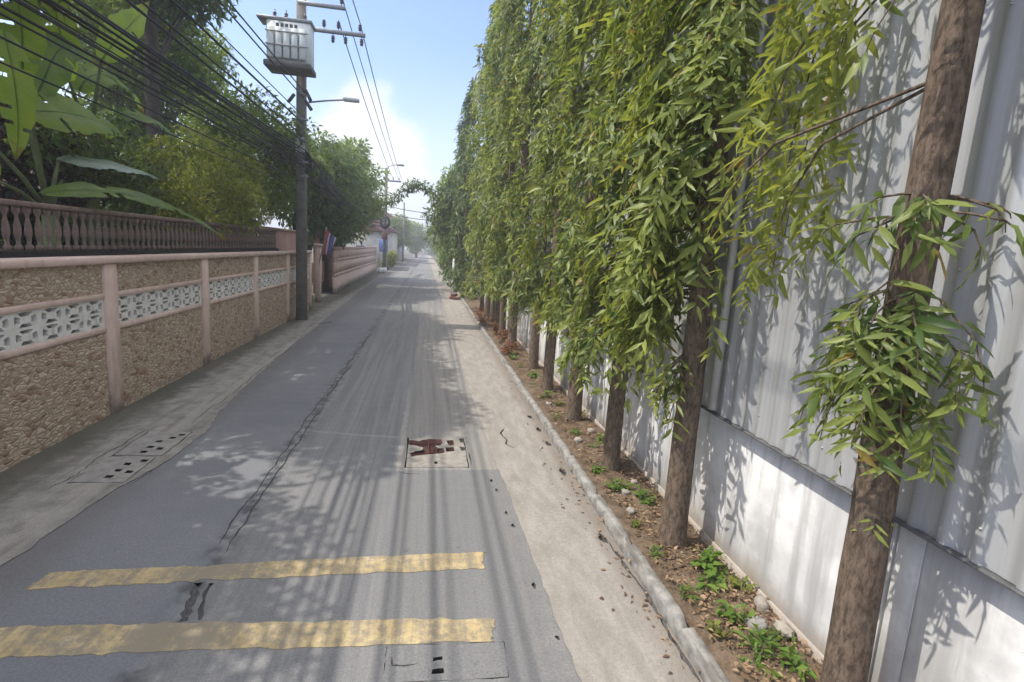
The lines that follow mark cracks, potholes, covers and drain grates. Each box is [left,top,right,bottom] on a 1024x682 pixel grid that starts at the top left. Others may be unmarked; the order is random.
crack [178,584,211,622]
manhole cover [383,641,509,682]
crack [195,334,371,550]
manhole cover [404,438,469,468]
